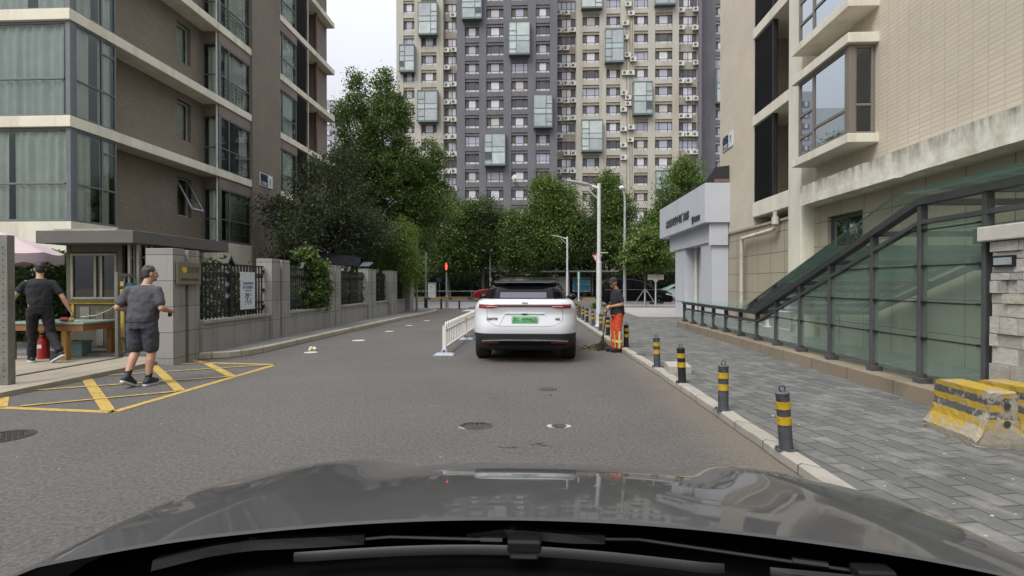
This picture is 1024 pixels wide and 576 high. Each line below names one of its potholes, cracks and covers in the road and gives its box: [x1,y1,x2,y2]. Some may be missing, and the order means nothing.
manhole cover [0,429,38,443]
